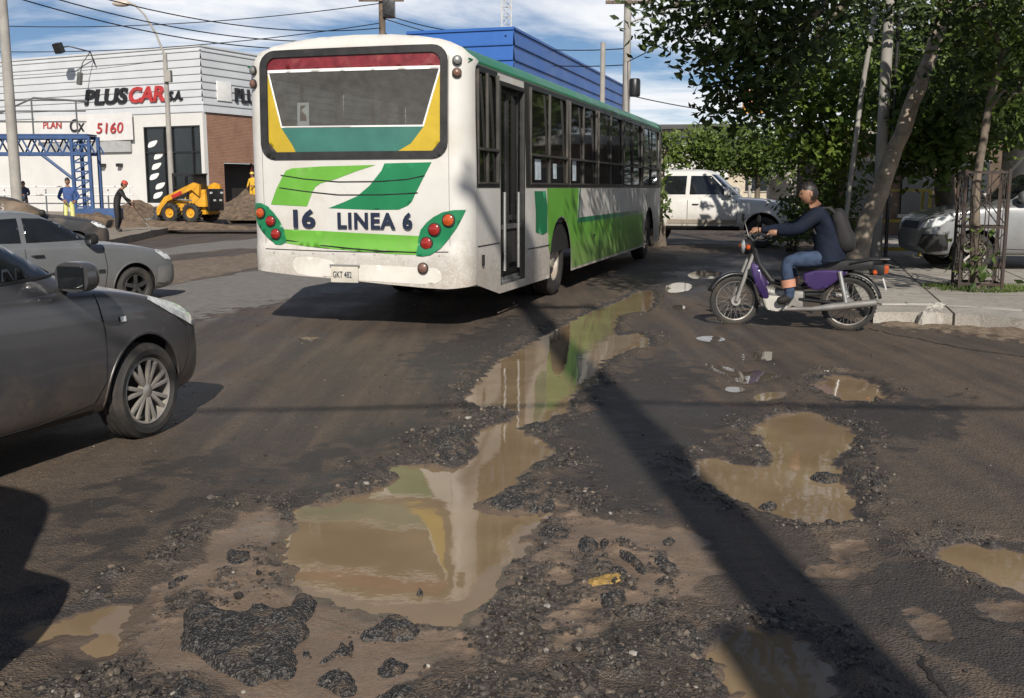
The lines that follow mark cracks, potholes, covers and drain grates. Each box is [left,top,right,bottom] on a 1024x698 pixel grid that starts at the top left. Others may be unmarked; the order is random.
pothole [667,403,891,526]
pothole [668,603,889,698]
crack [917,654,948,697]
pothole [254,287,665,642]
pothole [0,582,180,670]
pothole [794,367,905,403]
pothole [903,524,1024,605]
